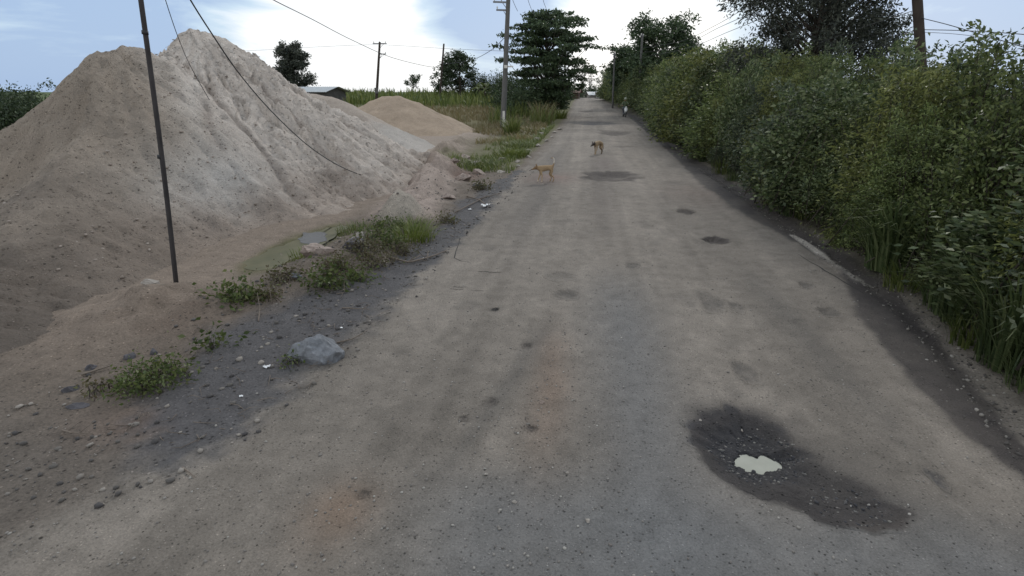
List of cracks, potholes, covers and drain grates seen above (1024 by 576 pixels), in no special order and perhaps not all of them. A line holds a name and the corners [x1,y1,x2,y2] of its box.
pothole [679,399,837,501]
pothole [578,171,645,182]
pothole [769,471,918,536]
pothole [699,236,732,245]
